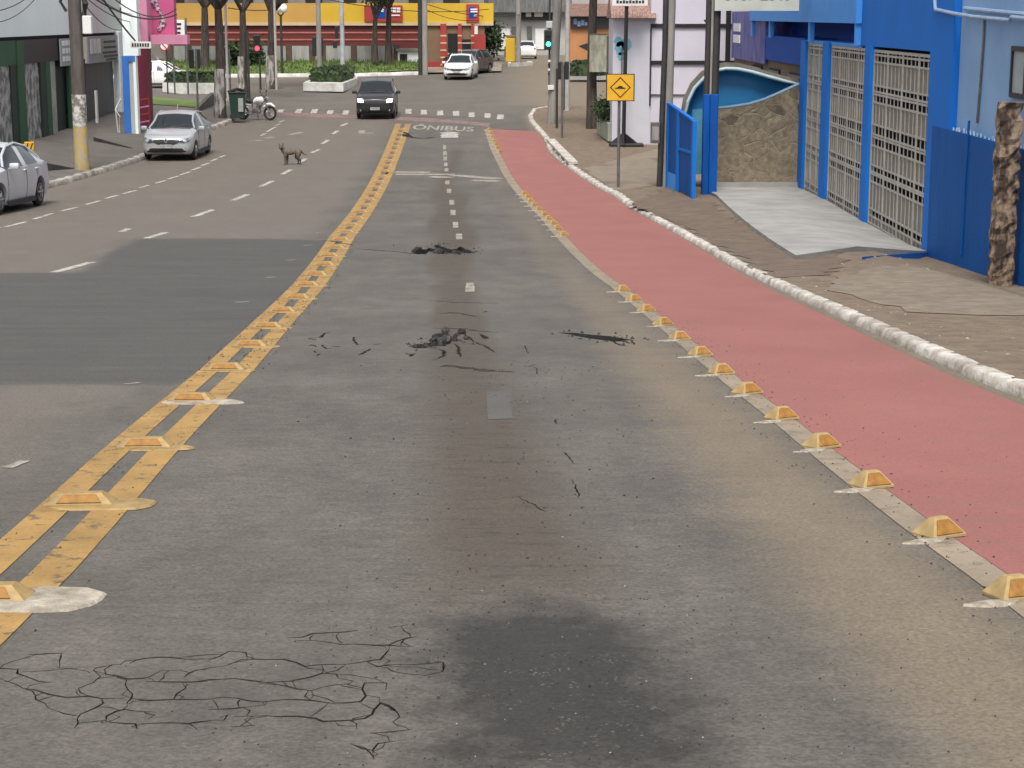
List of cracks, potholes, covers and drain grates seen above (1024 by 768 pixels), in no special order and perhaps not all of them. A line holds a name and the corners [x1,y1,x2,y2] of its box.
crack [0,625,445,759]
crack [308,332,377,356]
pothole [405,326,494,360]
pothole [393,242,481,256]
